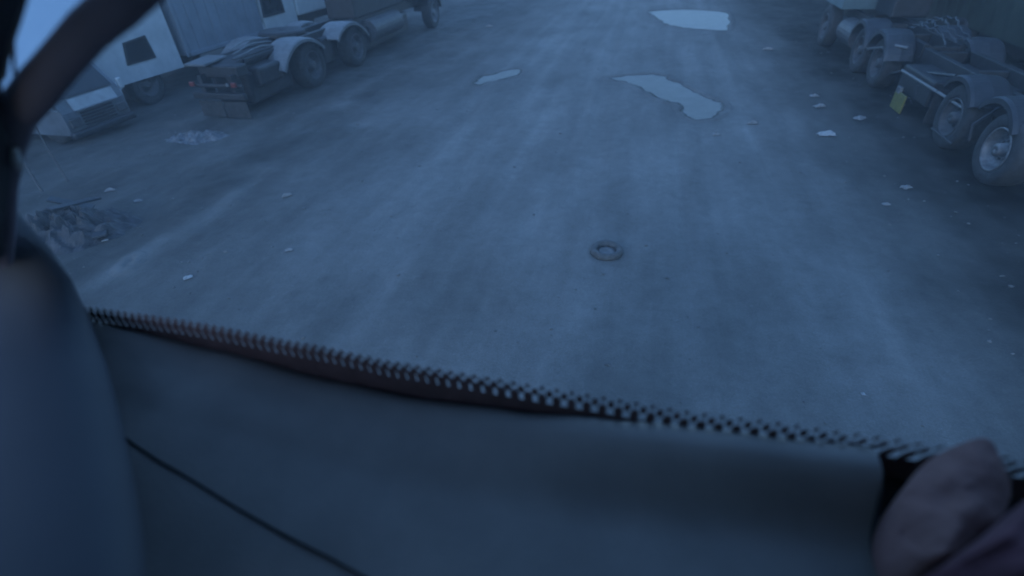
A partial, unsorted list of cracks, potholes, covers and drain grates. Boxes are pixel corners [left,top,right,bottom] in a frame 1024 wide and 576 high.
pothole [645,8,736,32]
pothole [467,66,529,87]
pothole [598,72,734,123]
